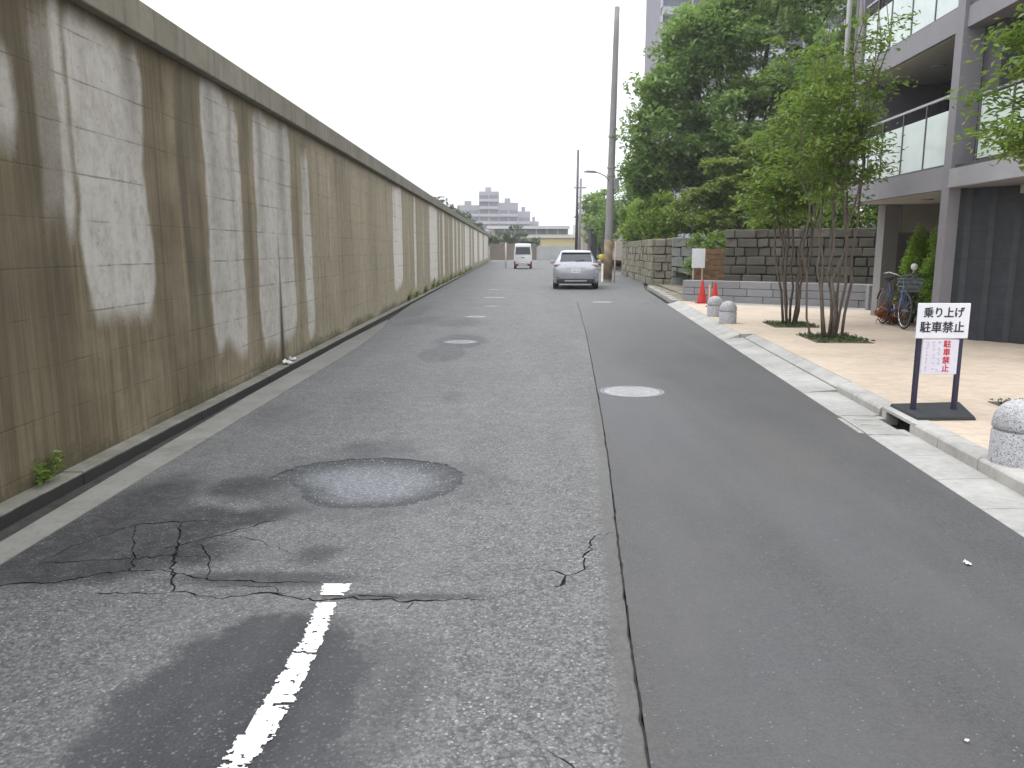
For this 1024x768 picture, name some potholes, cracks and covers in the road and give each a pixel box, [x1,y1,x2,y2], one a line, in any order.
crack [0,520,545,609]
drain grate [837,406,935,436]
manhole cover [600,386,665,398]
